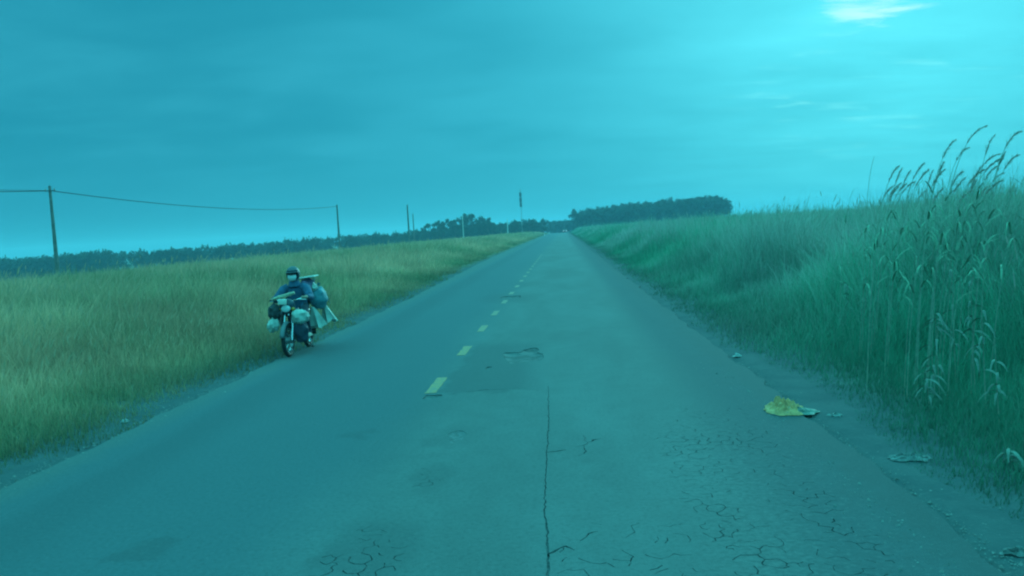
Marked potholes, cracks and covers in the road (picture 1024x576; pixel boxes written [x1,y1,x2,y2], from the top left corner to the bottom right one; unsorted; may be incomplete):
pothole [503,348,544,363]
crack [660,408,895,576]
crack [543,389,698,576]
crack [319,527,404,576]
